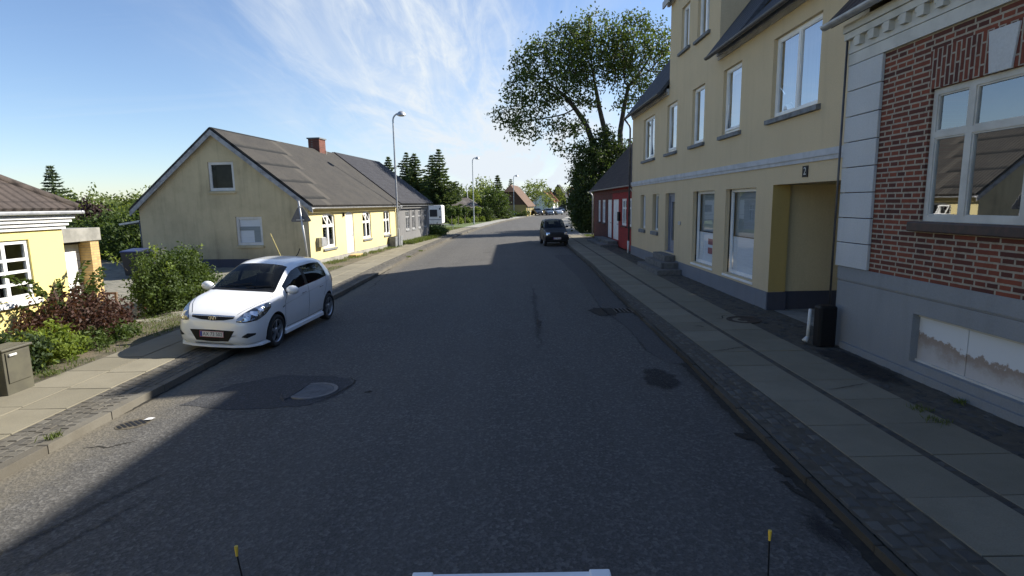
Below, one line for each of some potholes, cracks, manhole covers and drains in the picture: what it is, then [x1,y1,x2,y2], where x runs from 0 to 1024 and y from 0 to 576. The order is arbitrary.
drain grate [115,418,151,430]
manhole cover [290,382,339,400]
manhole cover [726,316,762,324]
